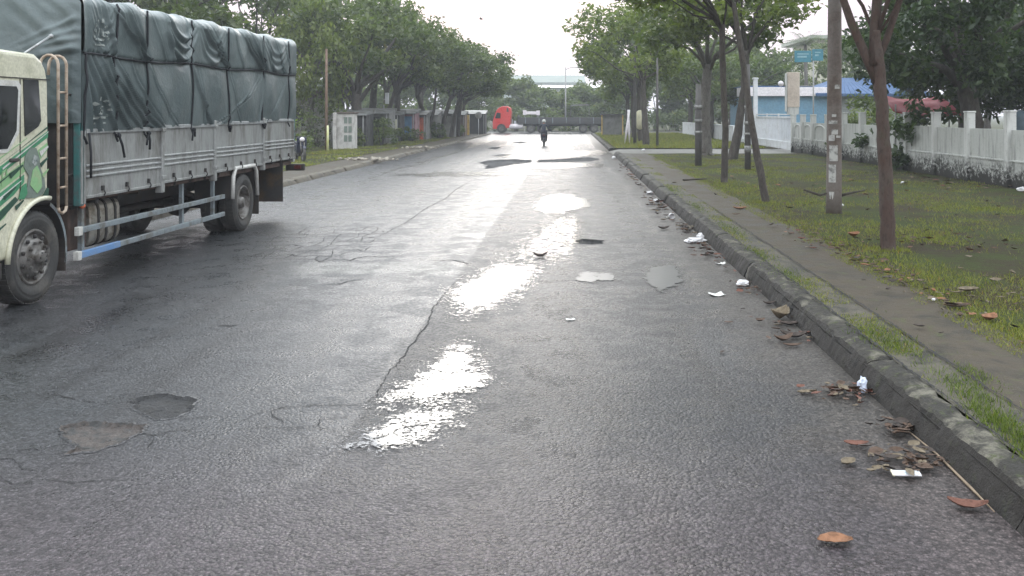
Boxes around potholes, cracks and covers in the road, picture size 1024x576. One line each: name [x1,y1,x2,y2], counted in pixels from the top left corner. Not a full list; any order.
pothole [129,392,201,421]
crack [0,447,103,484]
crack [250,226,384,266]
crack [242,260,468,431]
pothole [56,420,150,456]
